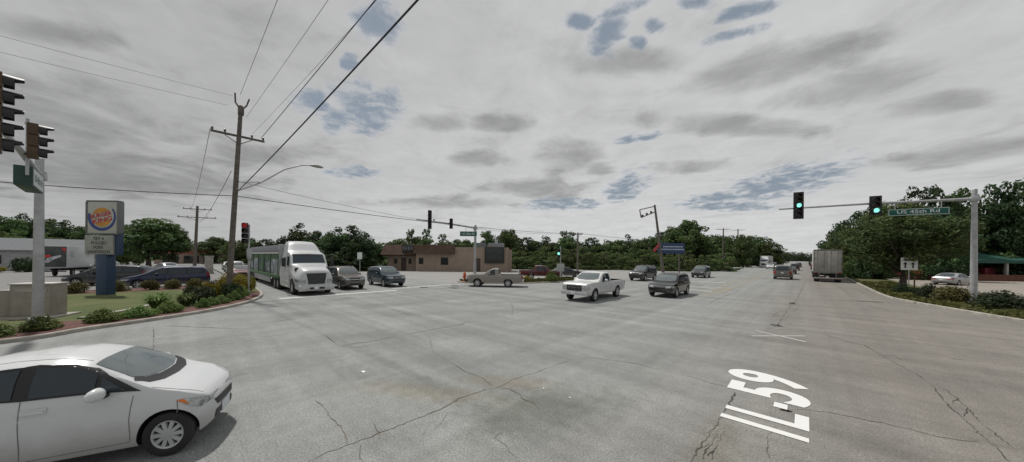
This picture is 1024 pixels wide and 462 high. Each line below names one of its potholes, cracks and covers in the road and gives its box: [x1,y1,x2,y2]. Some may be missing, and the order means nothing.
crack [798,333,1014,462]
crack [309,311,569,461]
